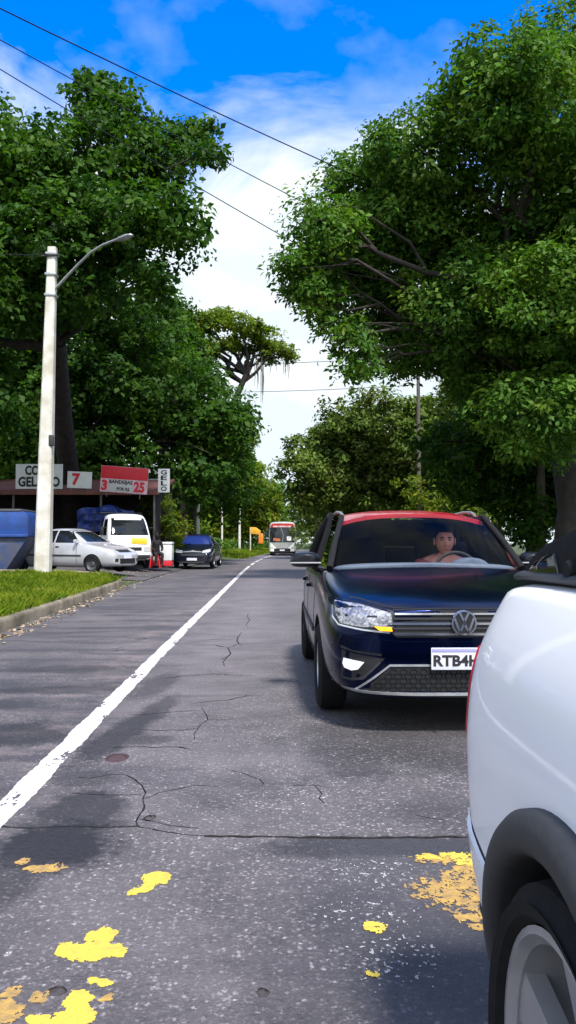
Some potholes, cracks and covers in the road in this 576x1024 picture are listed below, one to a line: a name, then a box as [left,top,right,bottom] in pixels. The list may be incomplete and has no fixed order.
crack [289,785,328,804]
crack [134,695,260,750]
pothole [48,986,67,996]
crack [164,615,250,679]
manhole cover [105,754,129,762]
crack [74,768,264,829]
pothole [256,988,270,998]
